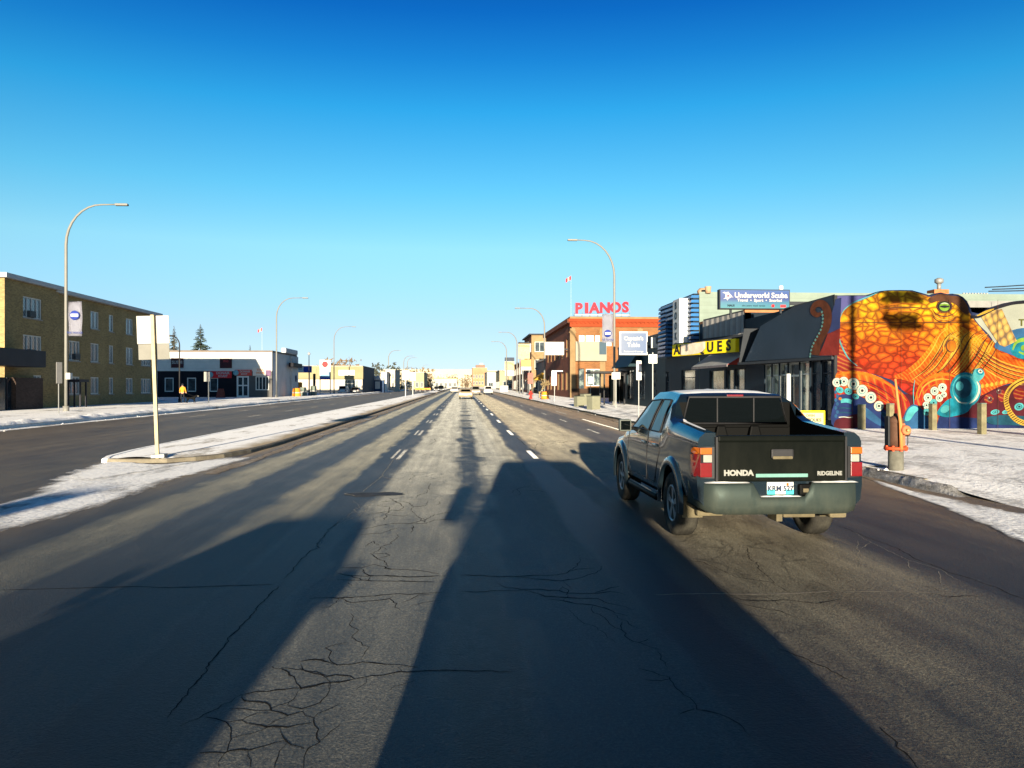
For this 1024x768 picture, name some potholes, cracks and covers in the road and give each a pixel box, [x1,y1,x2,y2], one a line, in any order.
crack [639,652,751,736]
crack [180,592,513,768]
crack [464,558,657,649]
crack [318,475,450,568]
crack [856,538,978,597]
